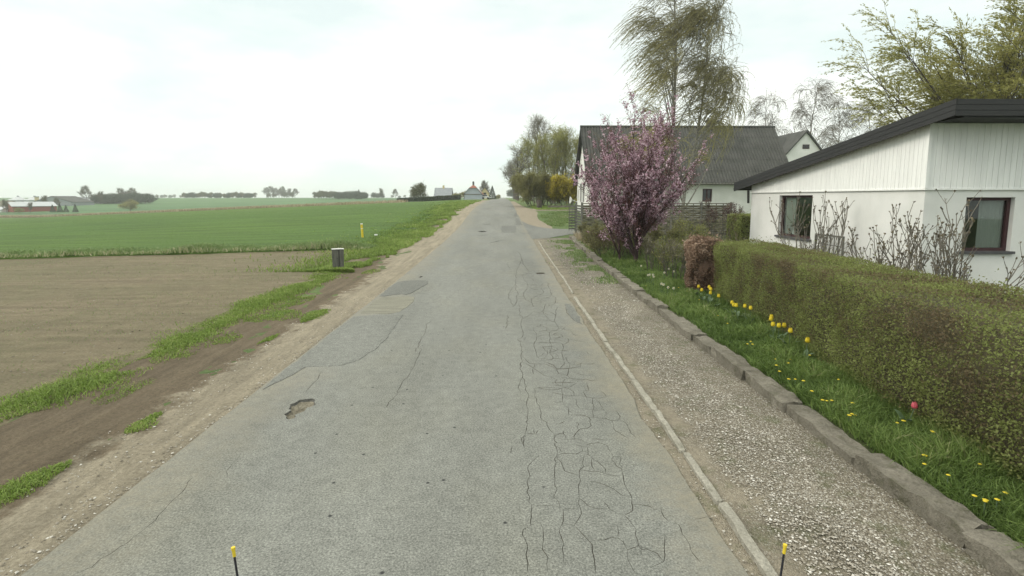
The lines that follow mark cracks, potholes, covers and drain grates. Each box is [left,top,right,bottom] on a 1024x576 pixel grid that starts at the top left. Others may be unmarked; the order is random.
crack [508,253,700,571]
pothole [284,399,316,419]
